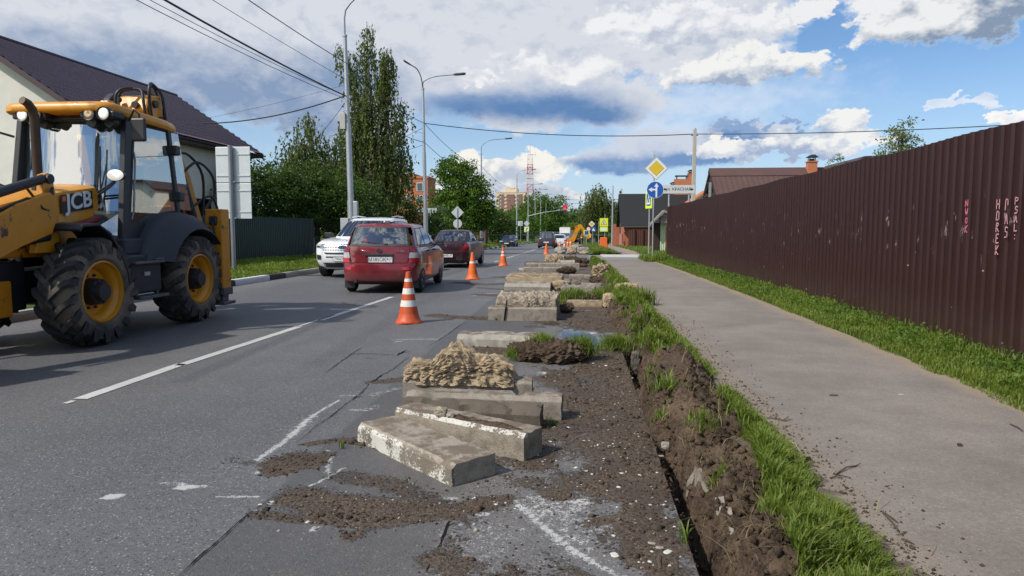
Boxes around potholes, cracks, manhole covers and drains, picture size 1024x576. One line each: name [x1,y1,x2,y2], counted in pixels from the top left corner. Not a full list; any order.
crack [425,520,455,572]
crack [300,349,407,440]
